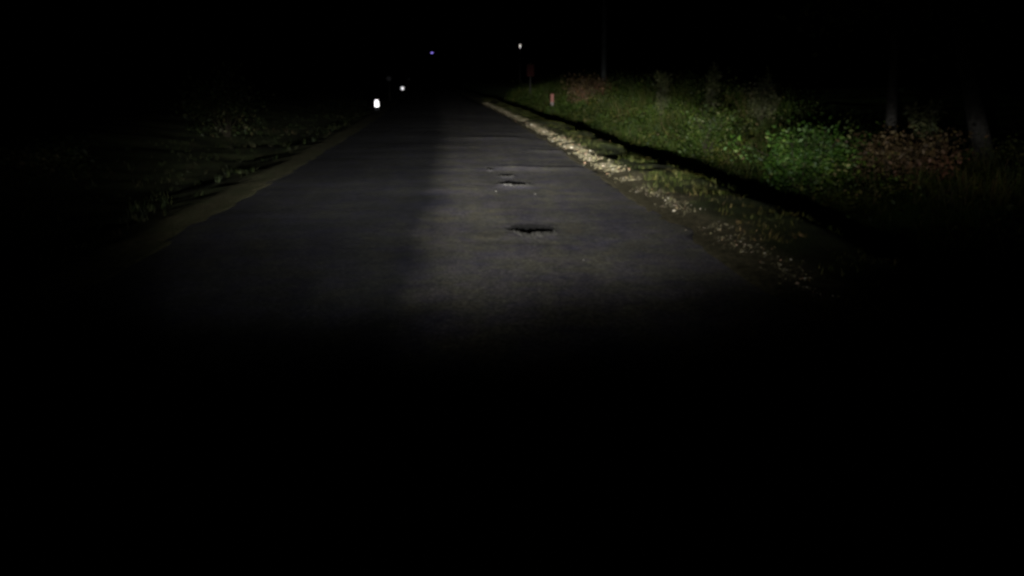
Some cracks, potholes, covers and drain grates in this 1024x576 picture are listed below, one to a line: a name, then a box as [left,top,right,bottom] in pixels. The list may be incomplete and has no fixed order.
pothole [505,224,557,239]
